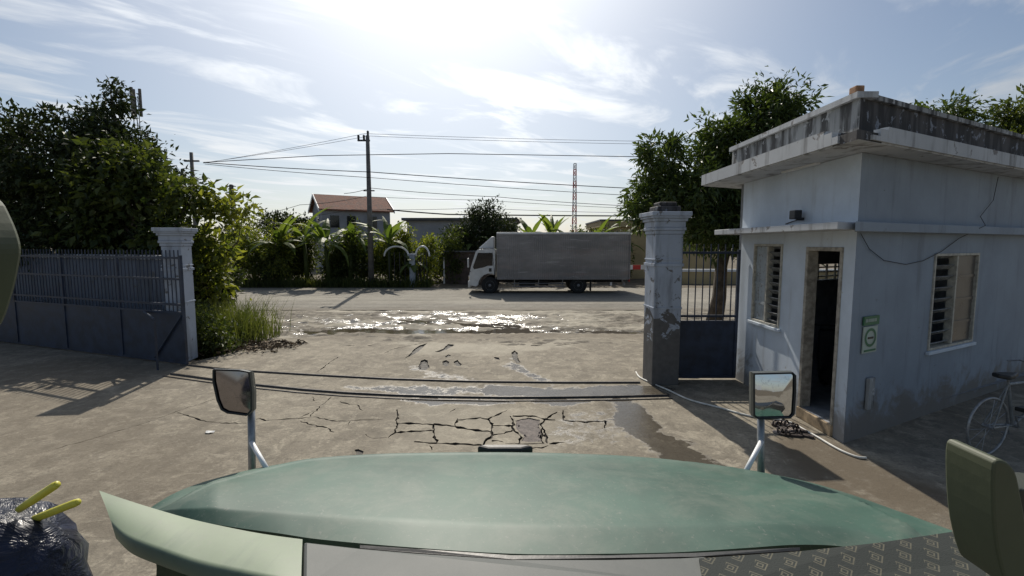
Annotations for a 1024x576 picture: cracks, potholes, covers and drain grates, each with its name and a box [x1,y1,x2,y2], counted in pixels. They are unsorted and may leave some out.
pothole [516,418,541,442]
crack [180,397,607,450]
